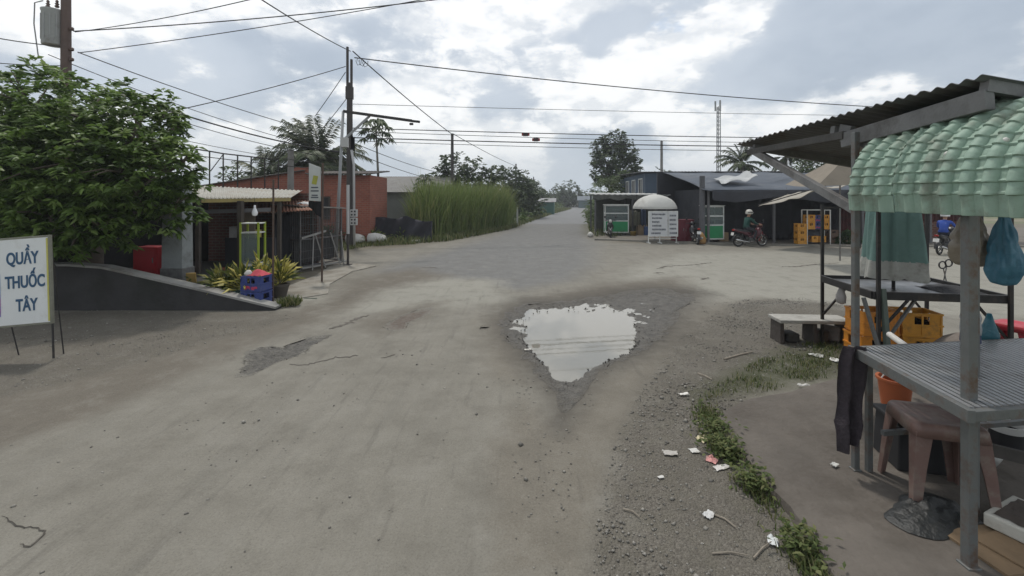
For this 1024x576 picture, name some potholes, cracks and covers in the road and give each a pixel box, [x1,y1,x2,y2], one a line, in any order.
pothole [496,288,695,413]
pothole [234,334,332,378]
crack [329,315,368,329]
crack [3,516,46,547]
